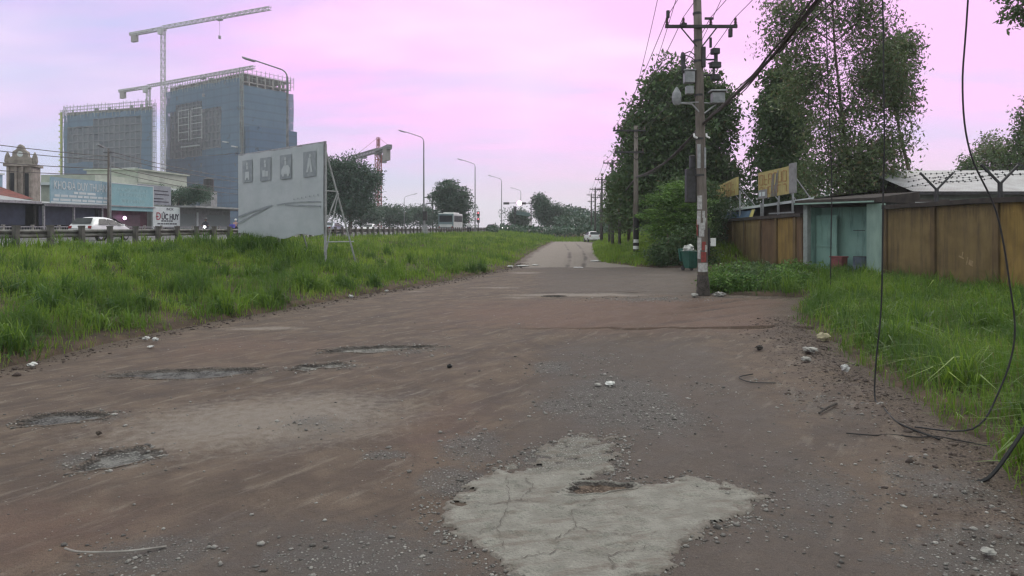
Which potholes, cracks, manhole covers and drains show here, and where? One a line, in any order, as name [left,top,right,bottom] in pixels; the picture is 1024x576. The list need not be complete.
crack [457,477,656,569]
pothole [561,480,642,496]
pothole [9,410,118,428]
pothole [283,361,356,372]
pothole [95,367,279,380]
pothole [315,344,447,354]
pothole [65,444,169,475]
